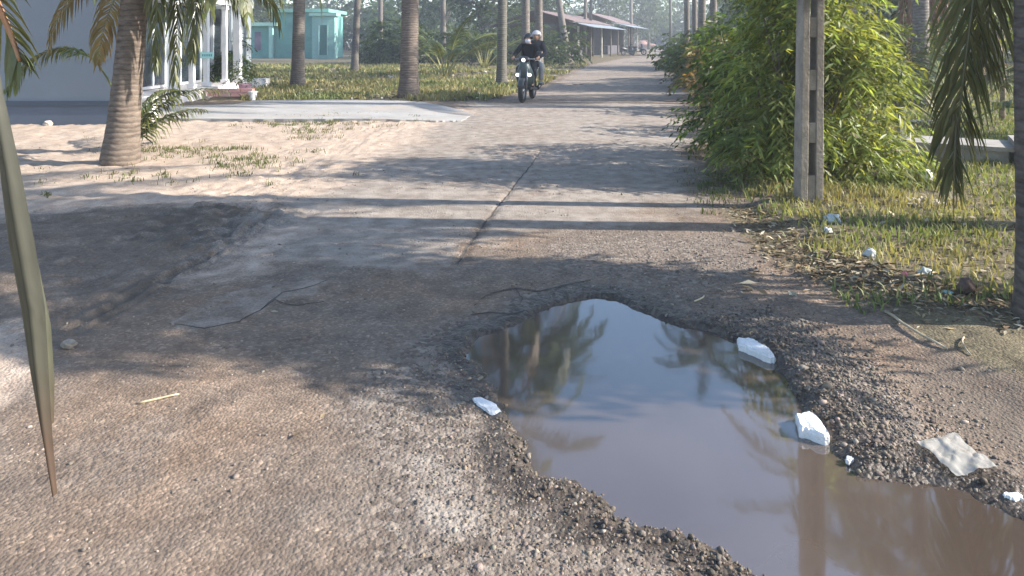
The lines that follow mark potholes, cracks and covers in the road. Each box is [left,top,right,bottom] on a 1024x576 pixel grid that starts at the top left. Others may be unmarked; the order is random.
crack [470,280,589,315]
pothole [454,292,1024,576]
crack [169,280,326,328]
